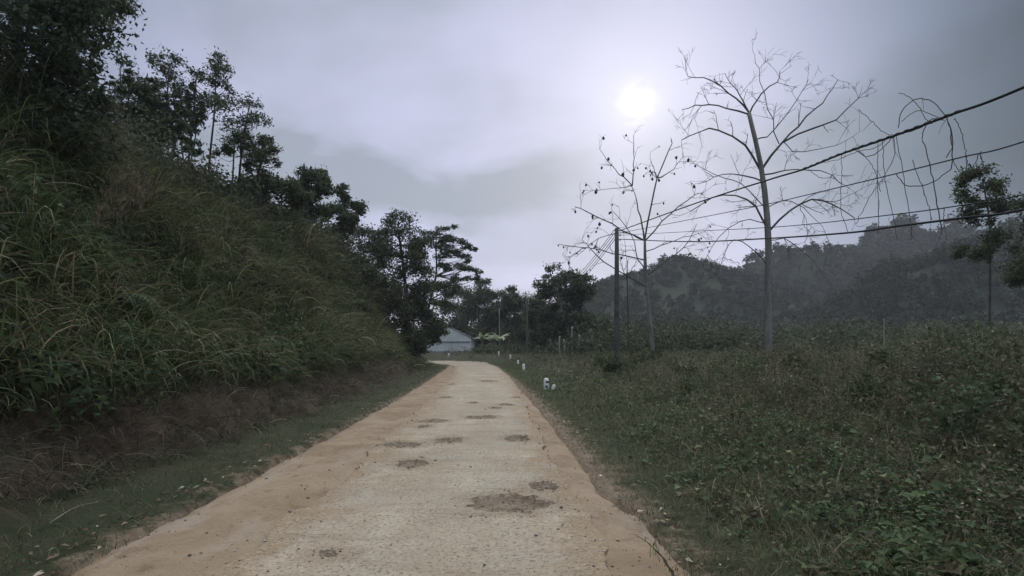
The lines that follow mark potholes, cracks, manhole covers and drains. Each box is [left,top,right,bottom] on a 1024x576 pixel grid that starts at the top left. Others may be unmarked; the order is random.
pothole [500,434,531,443]
pothole [428,435,464,446]
pothole [384,456,437,471]
pothole [452,488,580,524]
pothole [524,478,567,492]
pothole [378,439,435,449]
pothole [312,548,342,559]
